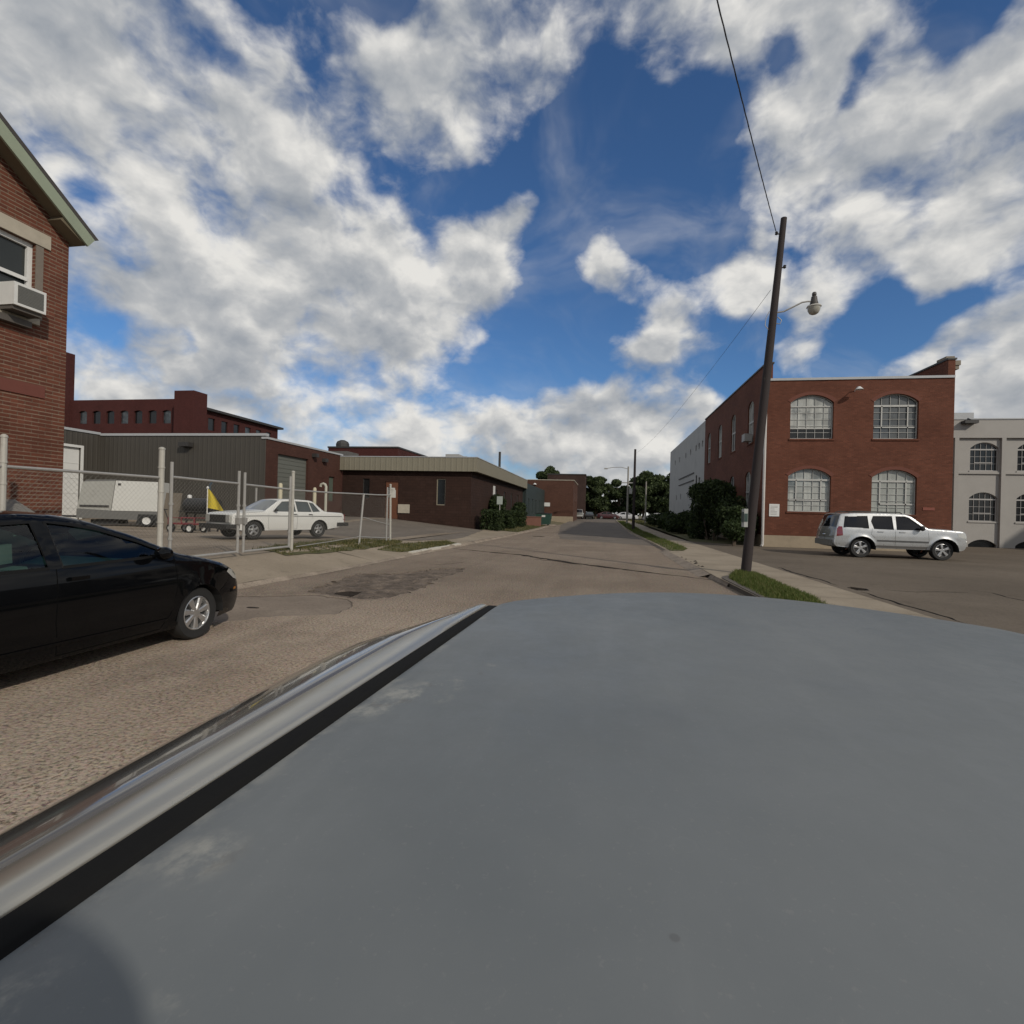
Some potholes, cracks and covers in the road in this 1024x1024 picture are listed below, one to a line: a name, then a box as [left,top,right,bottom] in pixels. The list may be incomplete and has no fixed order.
crack [863,590,1024,623]
